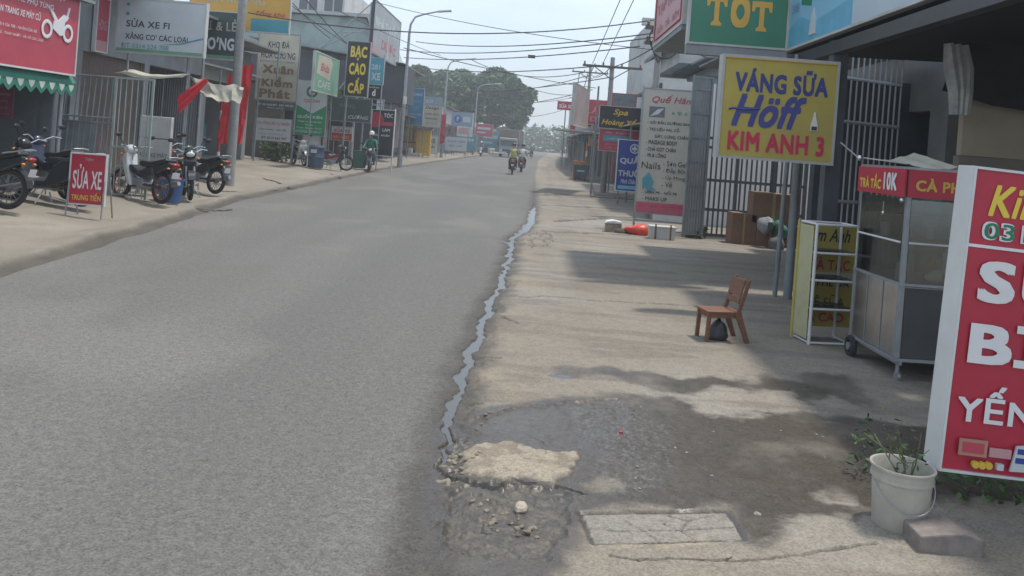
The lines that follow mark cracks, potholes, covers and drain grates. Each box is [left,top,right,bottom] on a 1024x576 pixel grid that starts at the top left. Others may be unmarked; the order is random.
pothole [440,477,574,563]
crack [586,515,880,563]
manhole cover [582,513,743,545]
crack [481,193,634,250]
